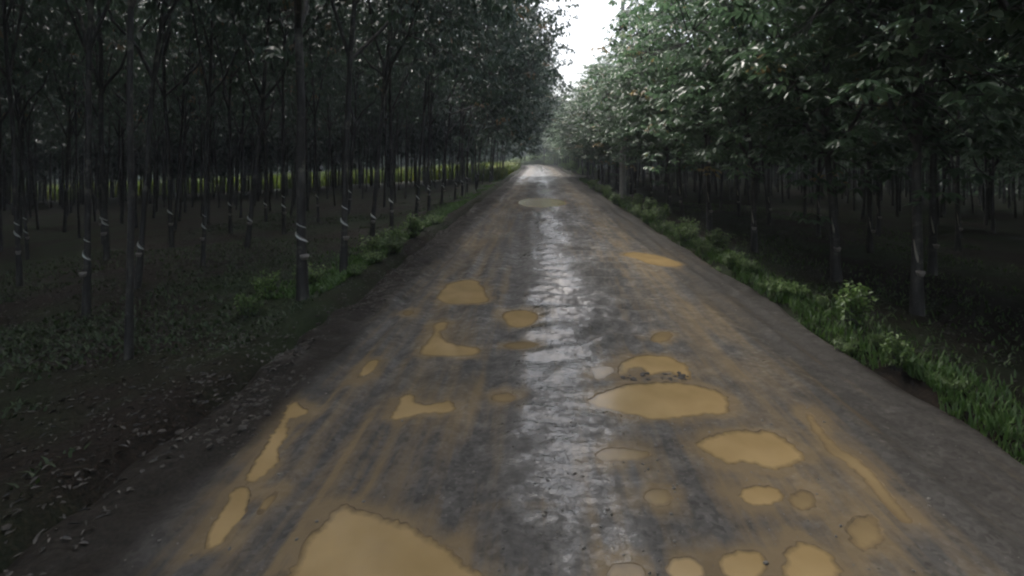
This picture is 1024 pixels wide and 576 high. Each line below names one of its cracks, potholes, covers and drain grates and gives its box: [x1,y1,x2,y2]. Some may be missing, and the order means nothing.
pothole [502,310,539,328]
pothole [665,556,705,576]
pothole [244,401,309,486]
pothole [419,321,481,357]
pothole [622,252,683,267]
pothole [436,279,490,304]
pothole [695,429,806,470]
pothole [389,393,457,421]
pothole [518,198,566,207]
pothole [718,549,769,576]
pothole [287,504,484,576]
pothole [587,381,731,420]
